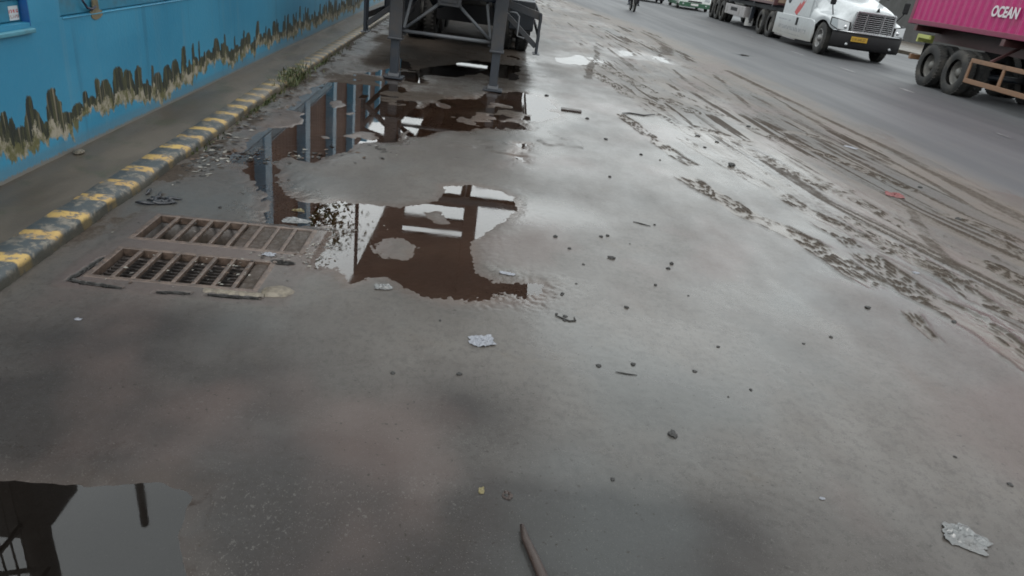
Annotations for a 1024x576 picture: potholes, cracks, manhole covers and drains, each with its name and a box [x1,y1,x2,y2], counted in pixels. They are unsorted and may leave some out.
drain grate [128,214,318,255]
drain grate [83,246,277,292]
